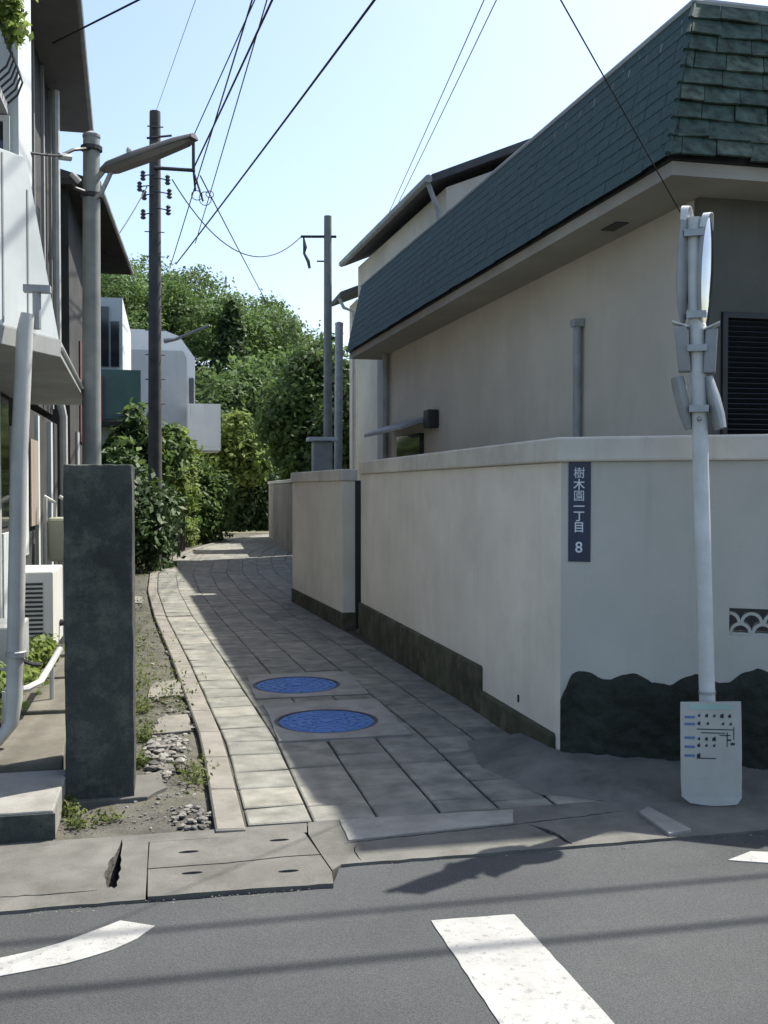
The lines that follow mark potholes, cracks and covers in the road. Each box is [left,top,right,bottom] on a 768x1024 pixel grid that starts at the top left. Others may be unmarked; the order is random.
manhole cover [247,671,369,700]
manhole cover [263,698,412,743]
